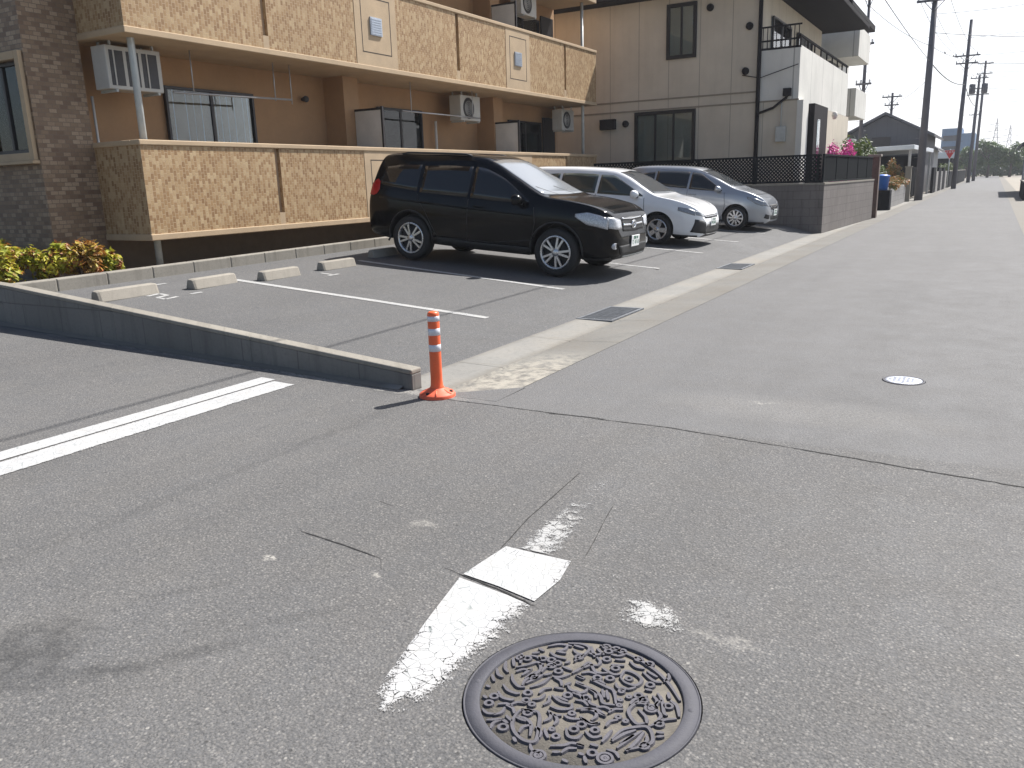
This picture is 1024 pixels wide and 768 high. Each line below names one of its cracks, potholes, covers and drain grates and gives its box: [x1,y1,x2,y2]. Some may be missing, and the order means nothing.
crack [506,474,578,542]
manhole cover [463,632,701,768]
crack [302,531,382,569]
crack [446,568,534,606]
manhole cover [882,376,926,386]
drain grate [576,306,644,322]
